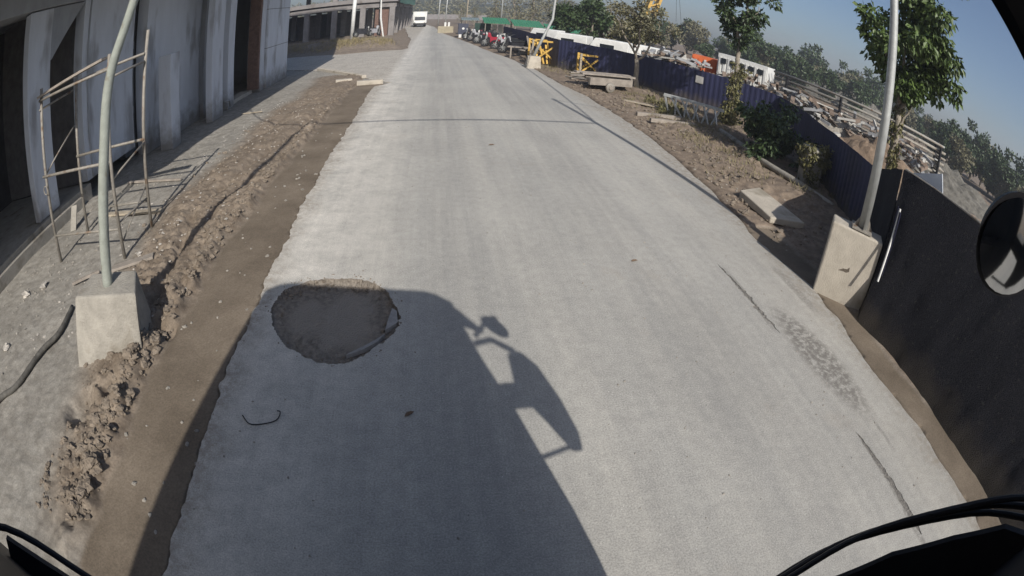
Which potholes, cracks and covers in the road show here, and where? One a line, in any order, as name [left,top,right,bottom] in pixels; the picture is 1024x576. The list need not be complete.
pothole [265,274,407,367]
crack [858,434,922,535]
crack [719,266,780,333]
